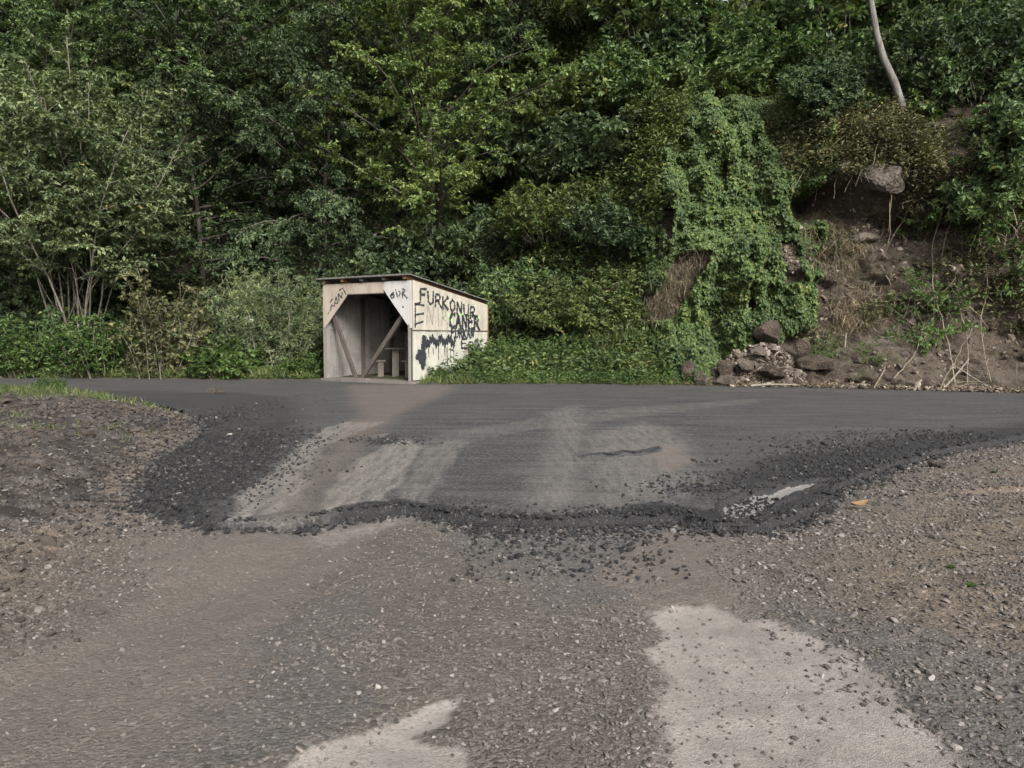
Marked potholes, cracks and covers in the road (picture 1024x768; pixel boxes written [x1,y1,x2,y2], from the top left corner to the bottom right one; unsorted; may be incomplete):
crack [577,446,663,458]
pothole [714,477,837,527]
